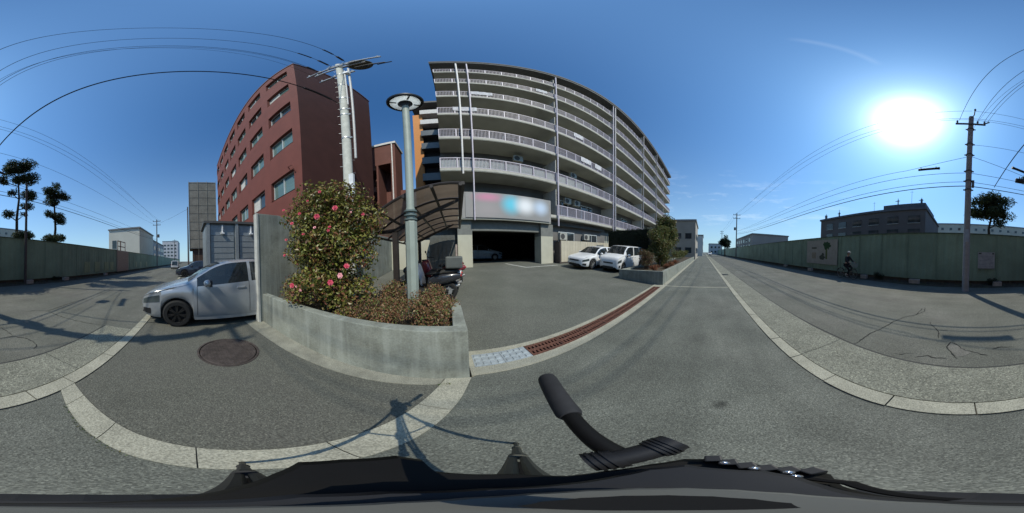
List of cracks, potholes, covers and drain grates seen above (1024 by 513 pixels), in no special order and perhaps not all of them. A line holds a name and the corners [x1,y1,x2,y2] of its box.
drain grate [579,319,608,333]
manhole cover [197,339,259,367]
drain grate [523,337,565,356]
drain grate [597,312,622,323]
crack [854,309,999,358]
drain grate [554,328,590,344]
